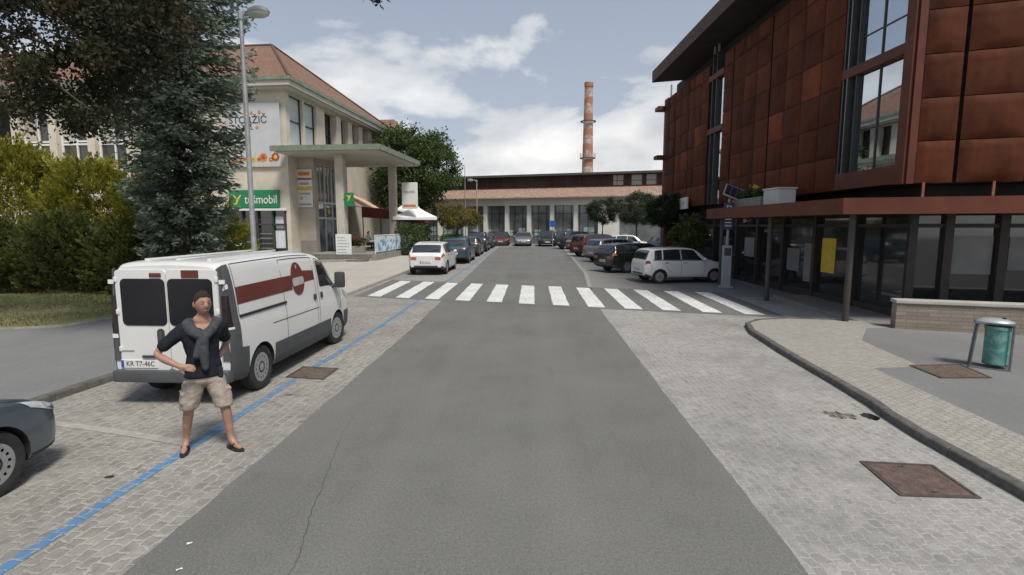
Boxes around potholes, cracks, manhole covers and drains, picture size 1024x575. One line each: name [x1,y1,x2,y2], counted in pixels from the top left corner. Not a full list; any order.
manhole cover [286,366,339,380]
crack [288,426,348,574]
manhole cover [909,364,992,378]
pothole [821,411,857,420]
manhole cover [860,461,982,499]
